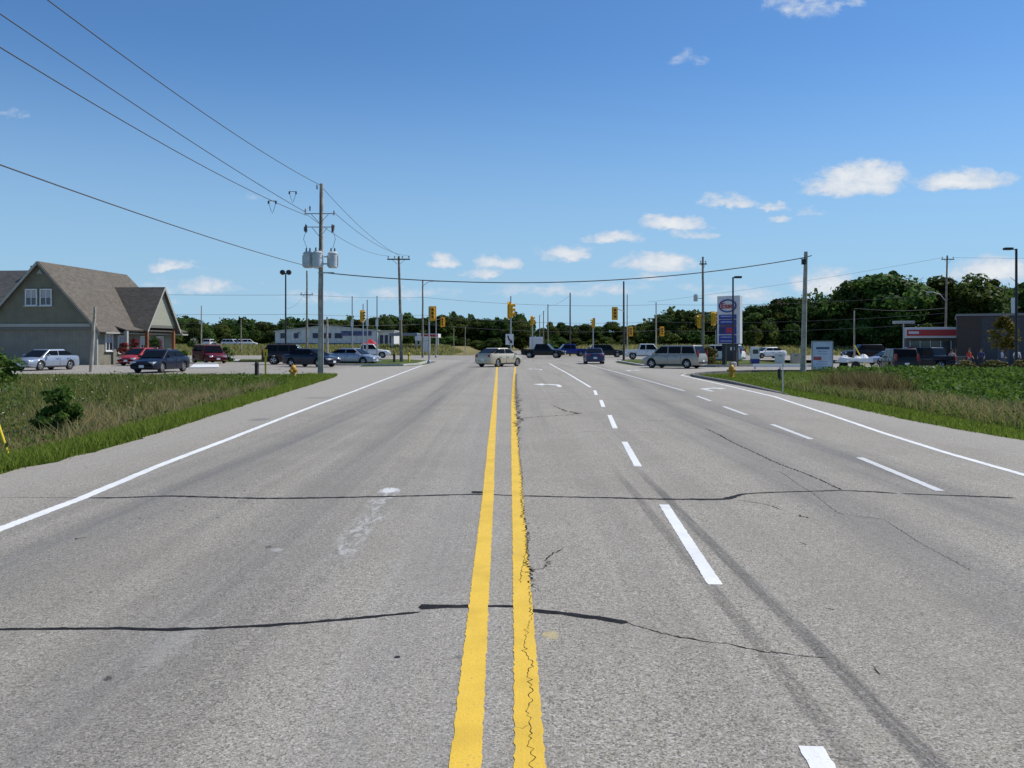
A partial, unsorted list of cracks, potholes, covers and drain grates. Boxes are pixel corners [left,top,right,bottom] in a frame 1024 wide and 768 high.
crack [511,374,582,768]
crack [706,428,970,570]
